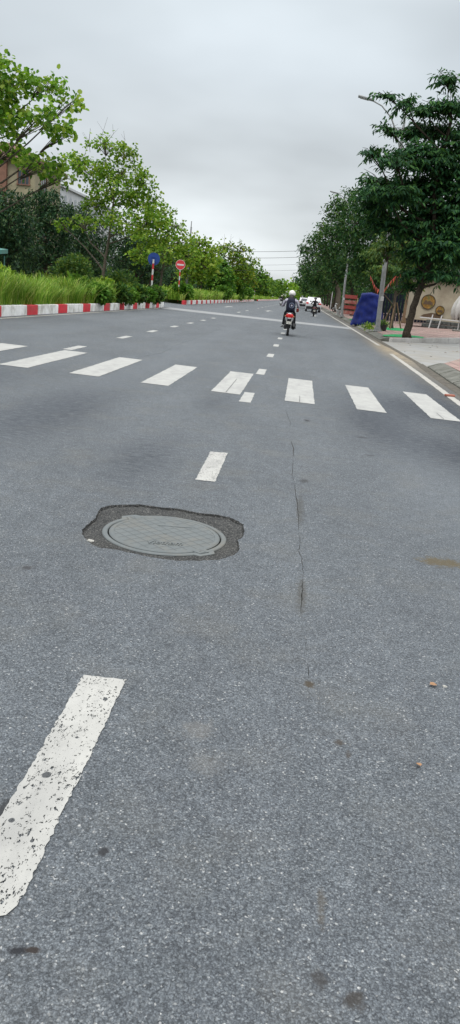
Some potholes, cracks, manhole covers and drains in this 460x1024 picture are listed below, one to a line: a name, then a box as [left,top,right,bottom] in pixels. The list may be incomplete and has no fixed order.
crack [286,412,310,682]
manhole cover [102,515,226,557]
